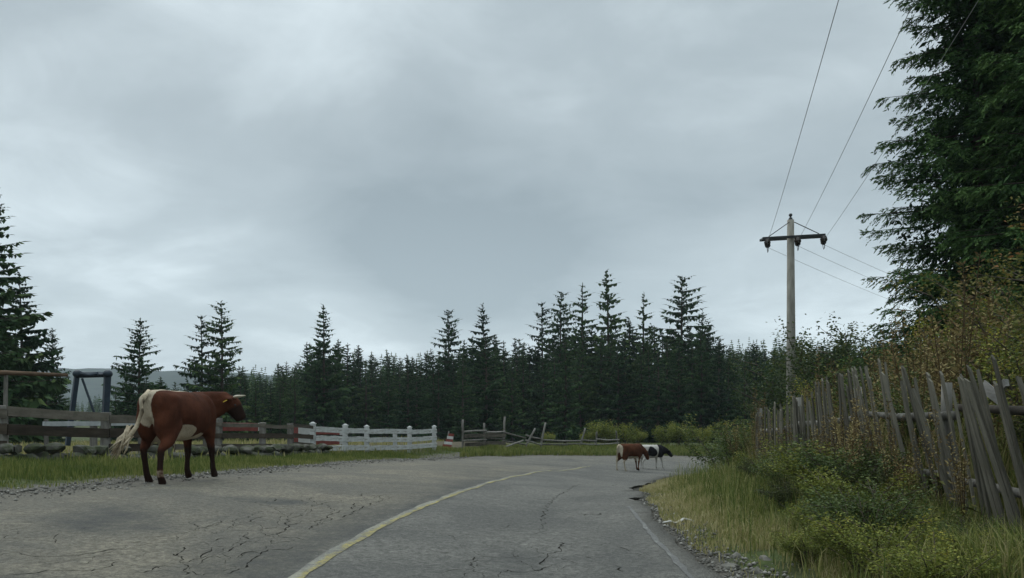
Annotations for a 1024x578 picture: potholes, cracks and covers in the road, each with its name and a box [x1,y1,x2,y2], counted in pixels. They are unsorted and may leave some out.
crack [437,522,645,578]
crack [0,492,389,576]
